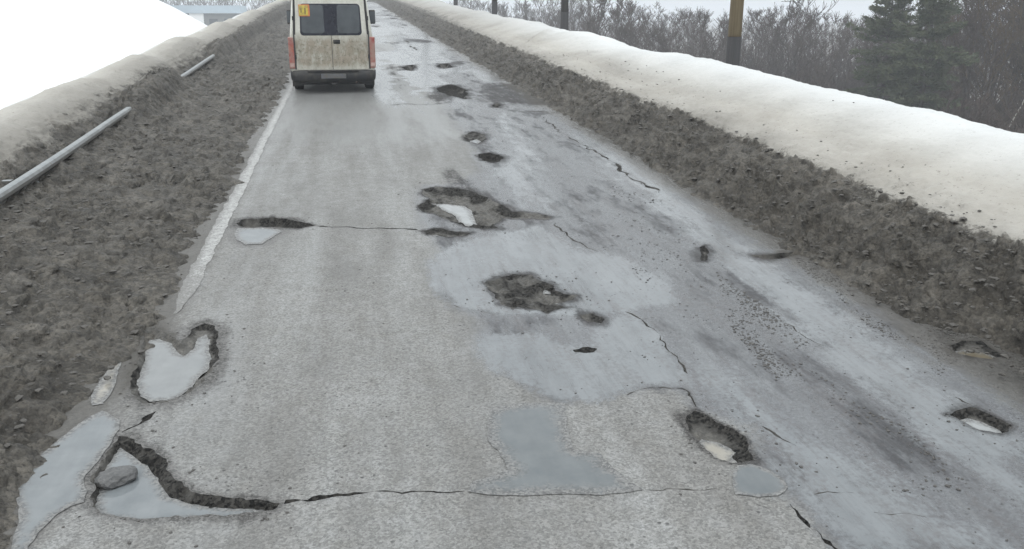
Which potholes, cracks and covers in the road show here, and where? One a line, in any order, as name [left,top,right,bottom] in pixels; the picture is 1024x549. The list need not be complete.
pothole [484,274,577,313]
pothole [130,323,219,403]
pothole [418,187,551,229]
crack [511,110,660,191]
pothole [951,340,1001,359]
pothole [686,411,755,463]
pothole [423,228,470,237]
pothole [945,407,1011,433]
pothole [437,85,468,99]
crack [284,490,462,504]
pothole [90,436,279,519]
pothole [236,217,314,228]
